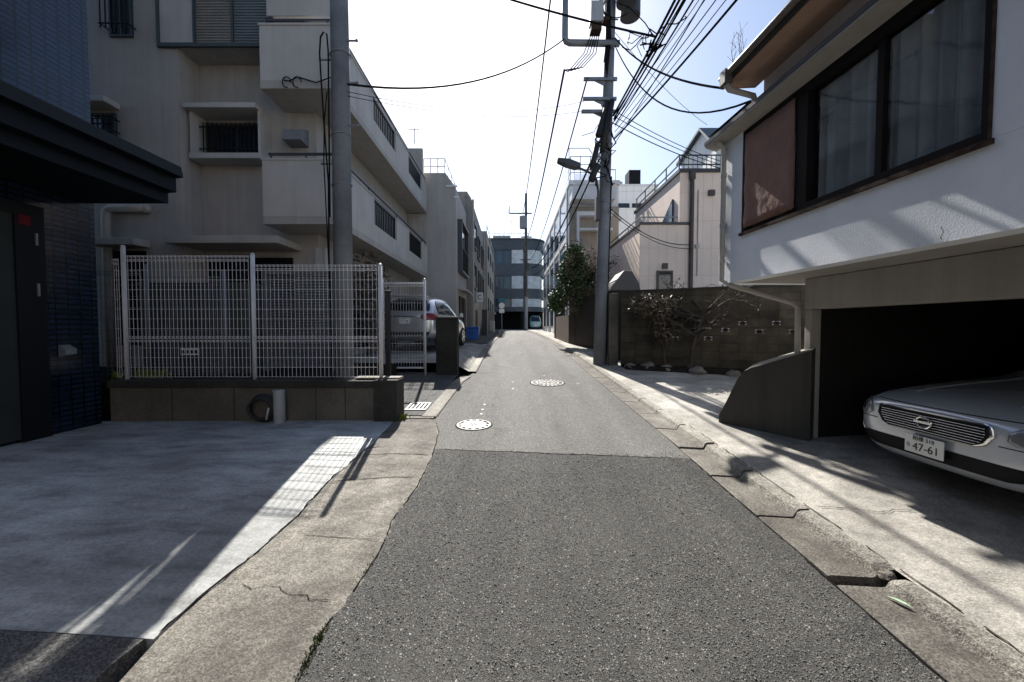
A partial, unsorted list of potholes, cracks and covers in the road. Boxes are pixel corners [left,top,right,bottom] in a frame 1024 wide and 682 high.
manhole cover [455,419,492,431]
drain grate [404,402,432,410]
